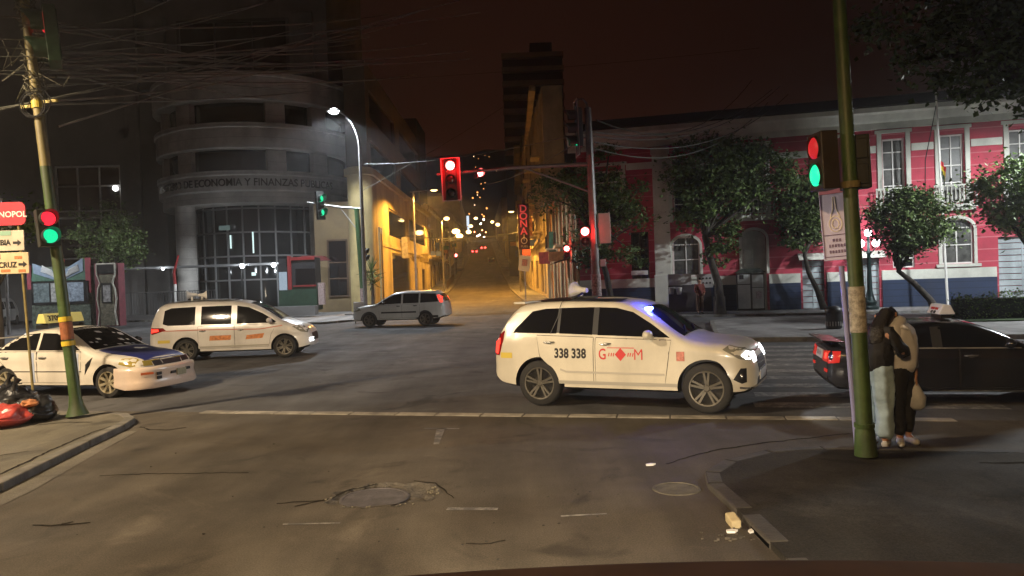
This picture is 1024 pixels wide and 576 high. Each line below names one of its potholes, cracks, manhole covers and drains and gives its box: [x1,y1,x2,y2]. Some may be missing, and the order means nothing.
manhole cover [652,482,701,496]
pothole [321,482,444,508]
manhole cover [339,488,410,508]
crack [667,433,849,464]
